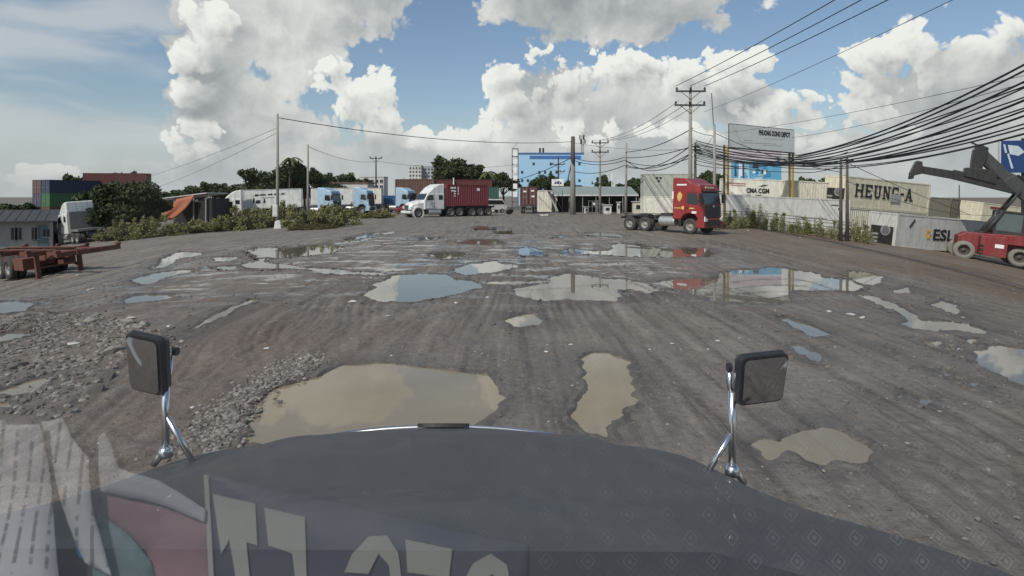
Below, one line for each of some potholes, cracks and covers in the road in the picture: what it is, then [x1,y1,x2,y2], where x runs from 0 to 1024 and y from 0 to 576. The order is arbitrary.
pothole [561,351,646,444]
pothole [499,312,547,328]
pothole [771,315,837,338]
pothole [118,293,176,304]
pothole [242,243,346,260]
pothole [355,272,486,303]
pothole [649,266,870,306]
pothole [959,343,1024,386]
pothole [741,423,884,471]
pothole [508,272,670,303]
pothole [451,260,523,276]
pothole [841,269,888,287]
